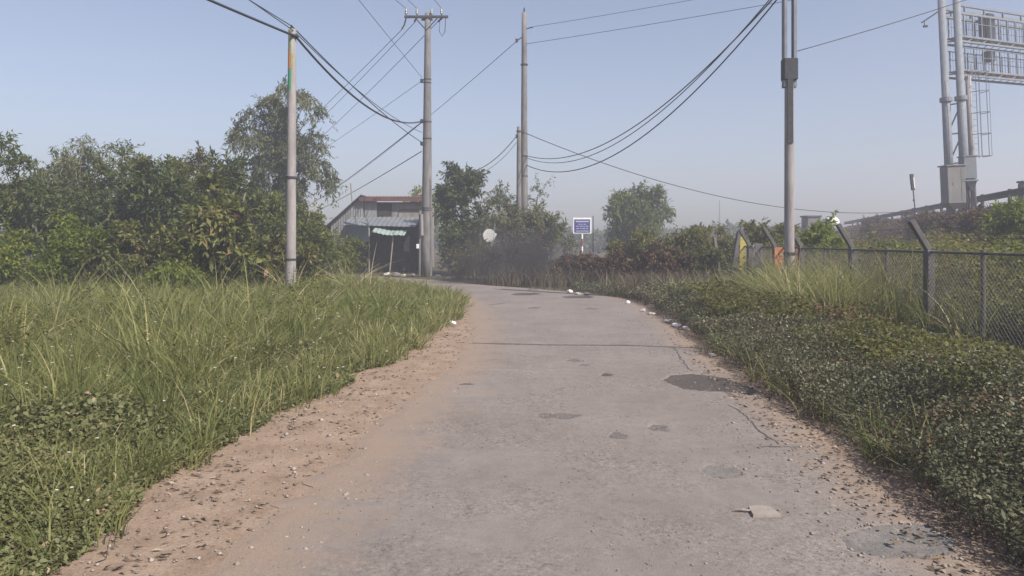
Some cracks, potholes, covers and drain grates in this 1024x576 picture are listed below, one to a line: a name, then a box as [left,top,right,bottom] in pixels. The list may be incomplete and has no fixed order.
crack [729,393,799,447]
